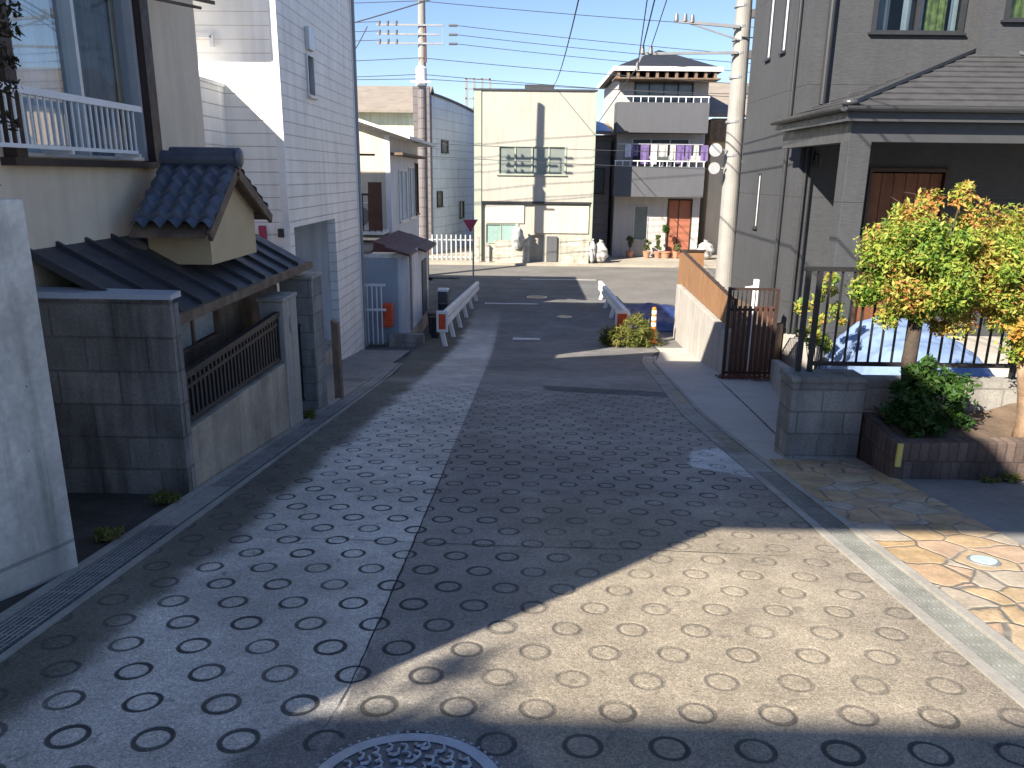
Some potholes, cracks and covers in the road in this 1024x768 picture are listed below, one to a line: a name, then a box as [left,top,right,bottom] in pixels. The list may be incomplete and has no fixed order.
utility cover [966,555,1002,567]
manhole cover [316,730,502,768]
